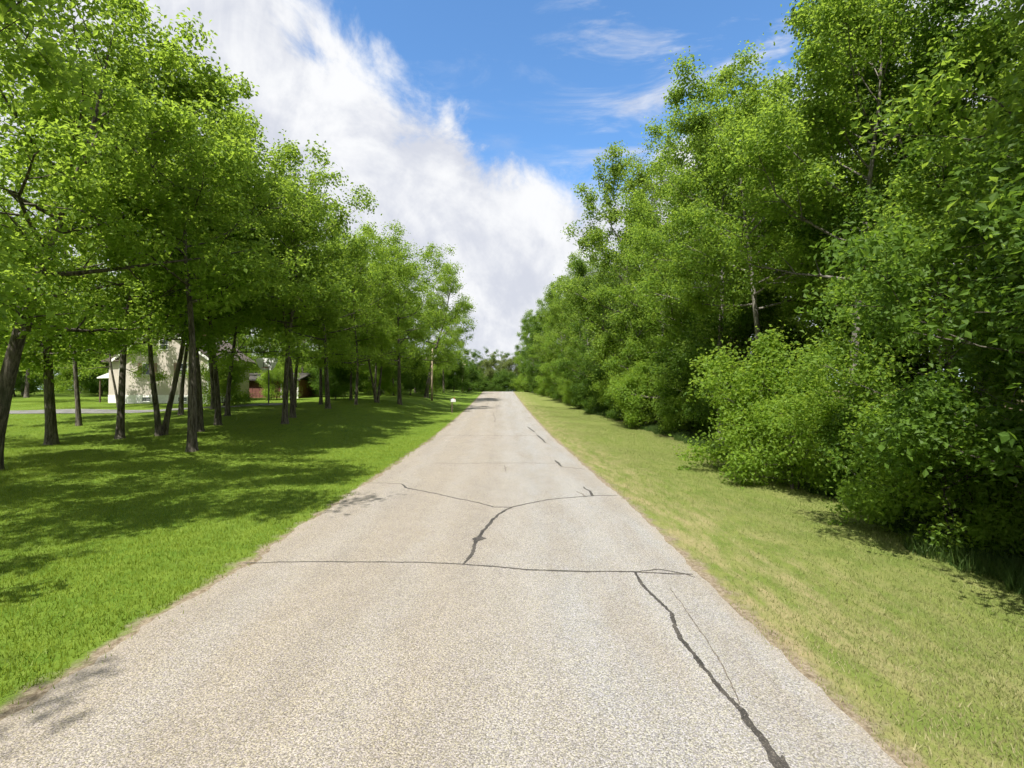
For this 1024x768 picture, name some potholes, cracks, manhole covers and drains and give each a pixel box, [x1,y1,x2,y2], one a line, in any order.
crack [462,411,546,443]
